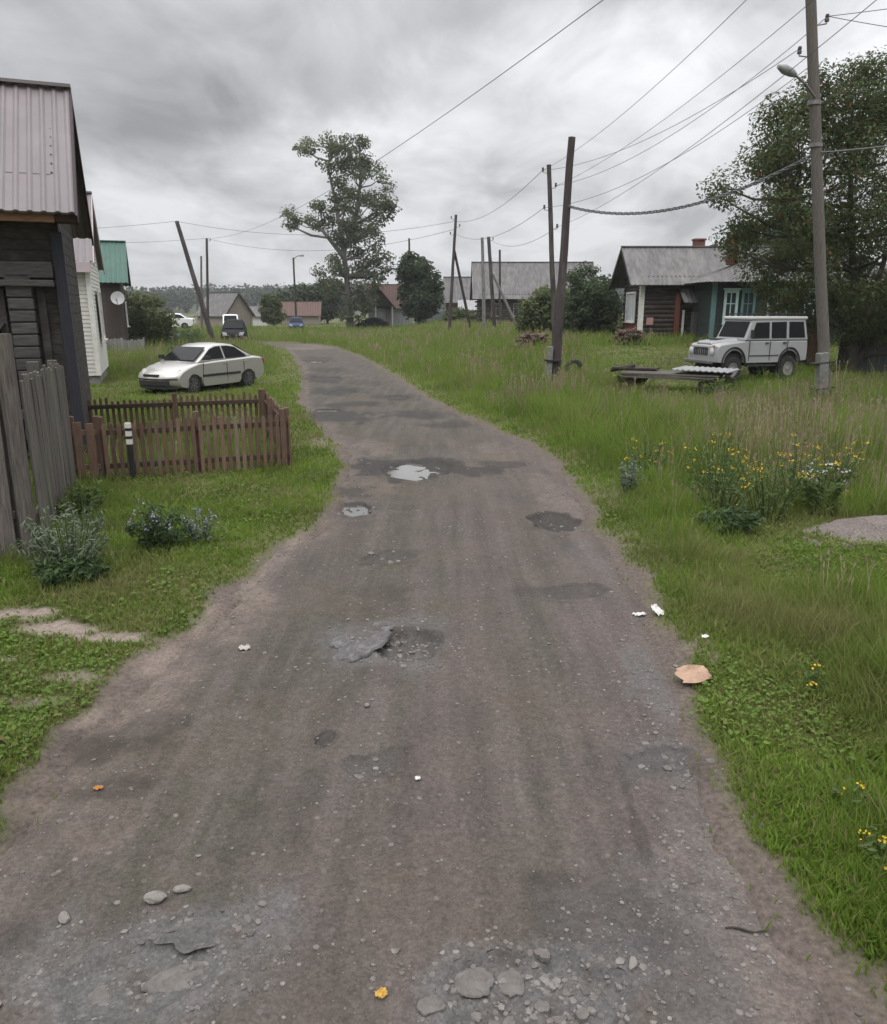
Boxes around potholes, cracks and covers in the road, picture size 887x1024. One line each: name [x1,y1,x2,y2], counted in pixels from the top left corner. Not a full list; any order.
pothole [352,622,455,670]
pothole [311,728,340,749]
pothole [367,456,466,484]
pothole [337,500,377,519]
